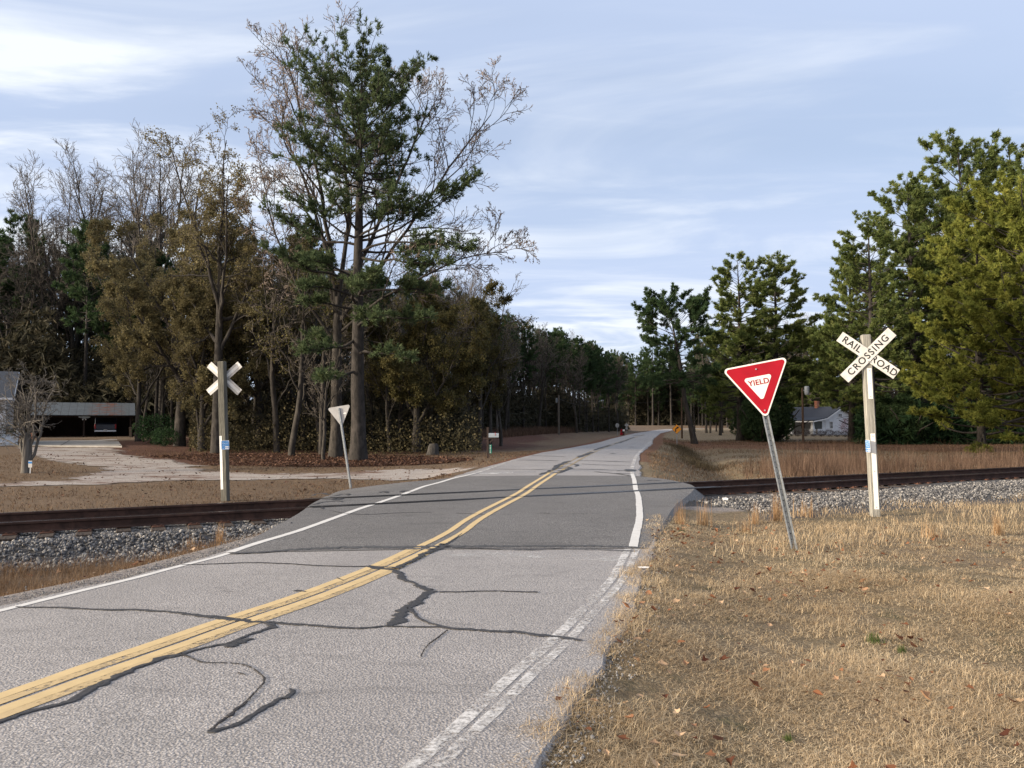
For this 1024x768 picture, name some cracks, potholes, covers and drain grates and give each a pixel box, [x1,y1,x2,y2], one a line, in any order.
crack [180,653,296,733]
